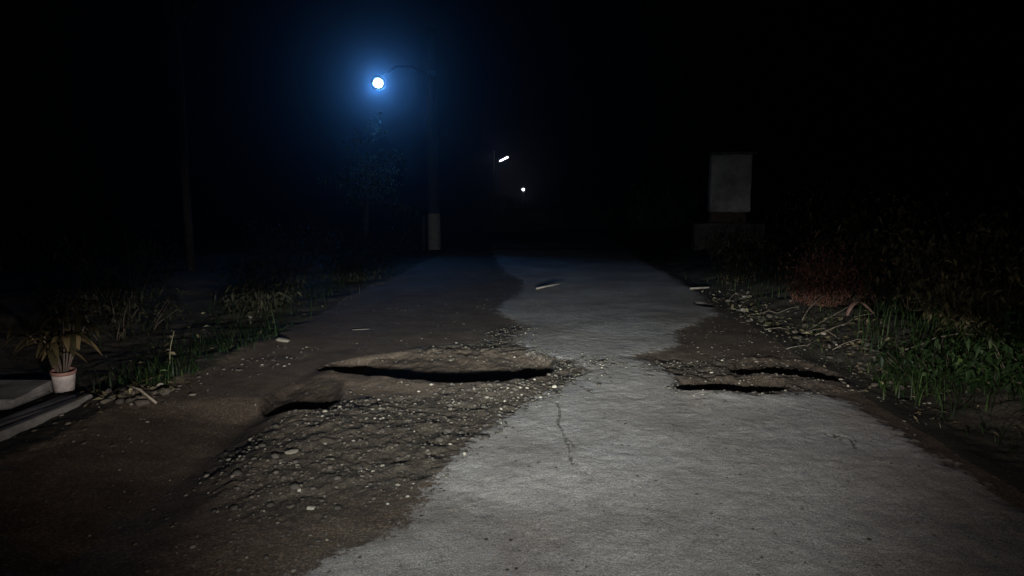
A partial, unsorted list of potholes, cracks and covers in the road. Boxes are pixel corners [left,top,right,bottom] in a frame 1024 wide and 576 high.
pothole [729,356,842,382]
pothole [259,377,345,417]
crack [556,401,575,465]
pothole [674,374,790,392]
pothole [316,346,555,383]
crack [823,433,857,449]
